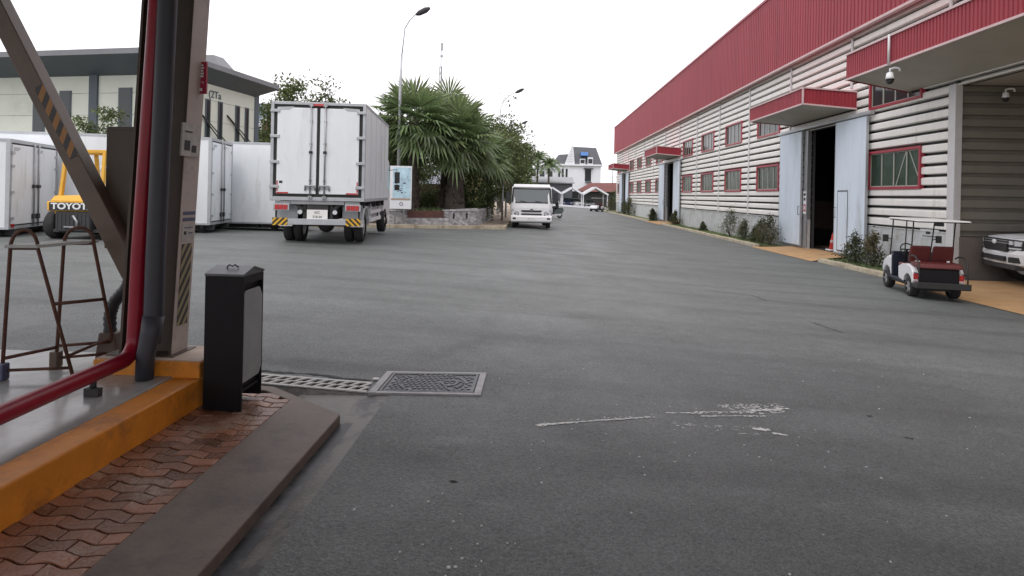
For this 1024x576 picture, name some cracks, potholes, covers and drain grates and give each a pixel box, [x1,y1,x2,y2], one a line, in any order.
manhole cover [368,371,487,396]
drain grate [261,373,373,393]
